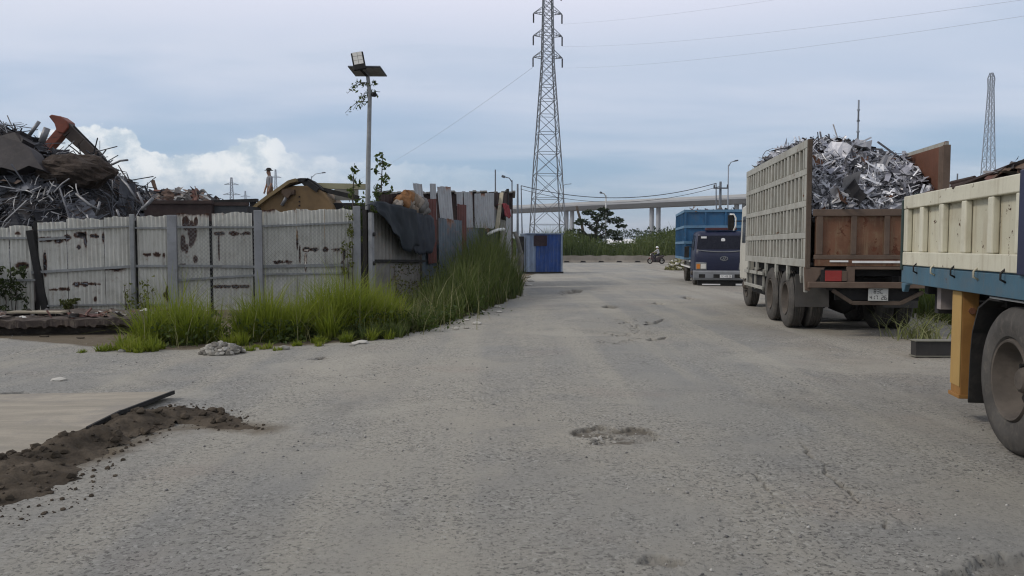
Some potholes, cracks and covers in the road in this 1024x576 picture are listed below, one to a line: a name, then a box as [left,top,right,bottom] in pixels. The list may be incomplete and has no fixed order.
pothole [637,318,670,326]
crack [743,438,907,535]
pothole [556,423,672,452]
pothole [619,548,710,575]
